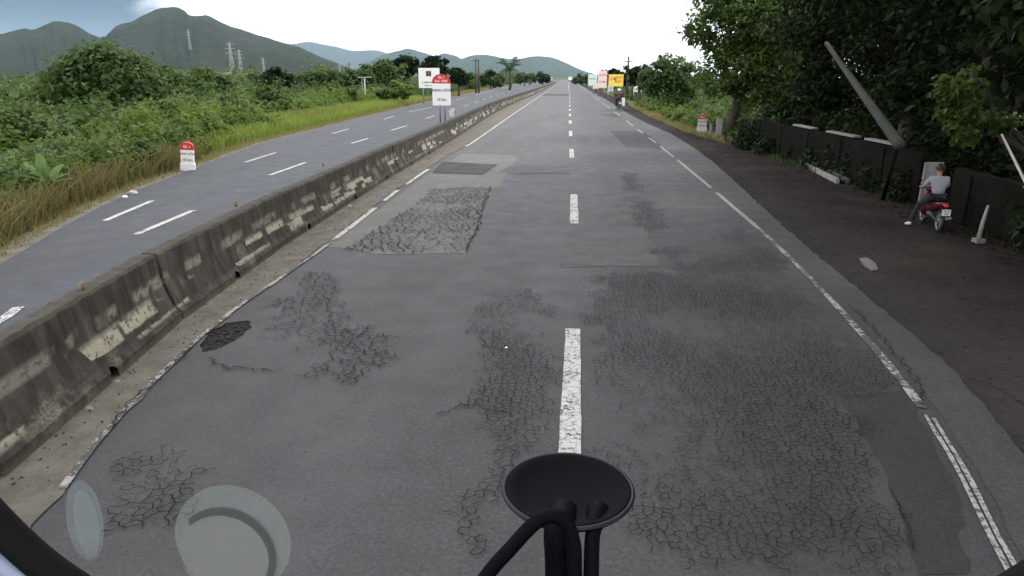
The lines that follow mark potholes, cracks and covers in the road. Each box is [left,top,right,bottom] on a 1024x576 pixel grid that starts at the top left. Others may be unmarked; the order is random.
crack [97,442,215,531]
crack [260,271,398,384]
crack [436,288,566,555]
pothole [200,320,252,352]
crack [347,186,491,253]
crack [615,172,687,258]
crack [579,229,912,576]
